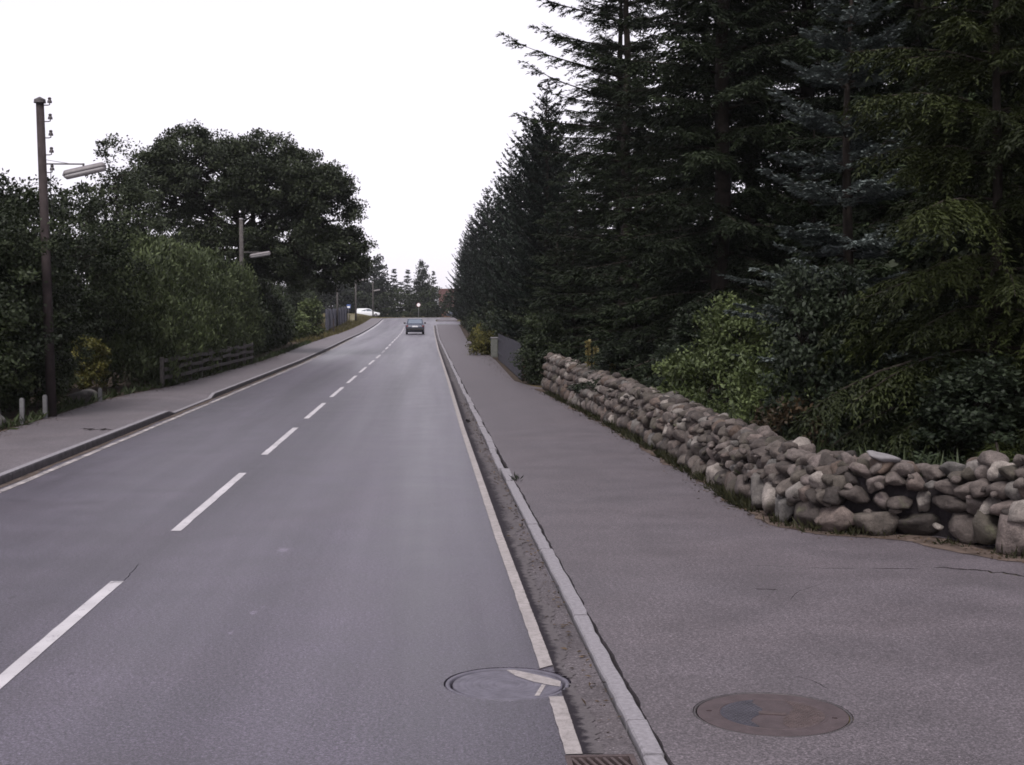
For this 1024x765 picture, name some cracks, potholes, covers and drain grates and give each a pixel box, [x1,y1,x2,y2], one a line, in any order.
drain grate [565,754,638,765]
manhole cover [693,693,853,737]
manhole cover [445,668,570,701]
